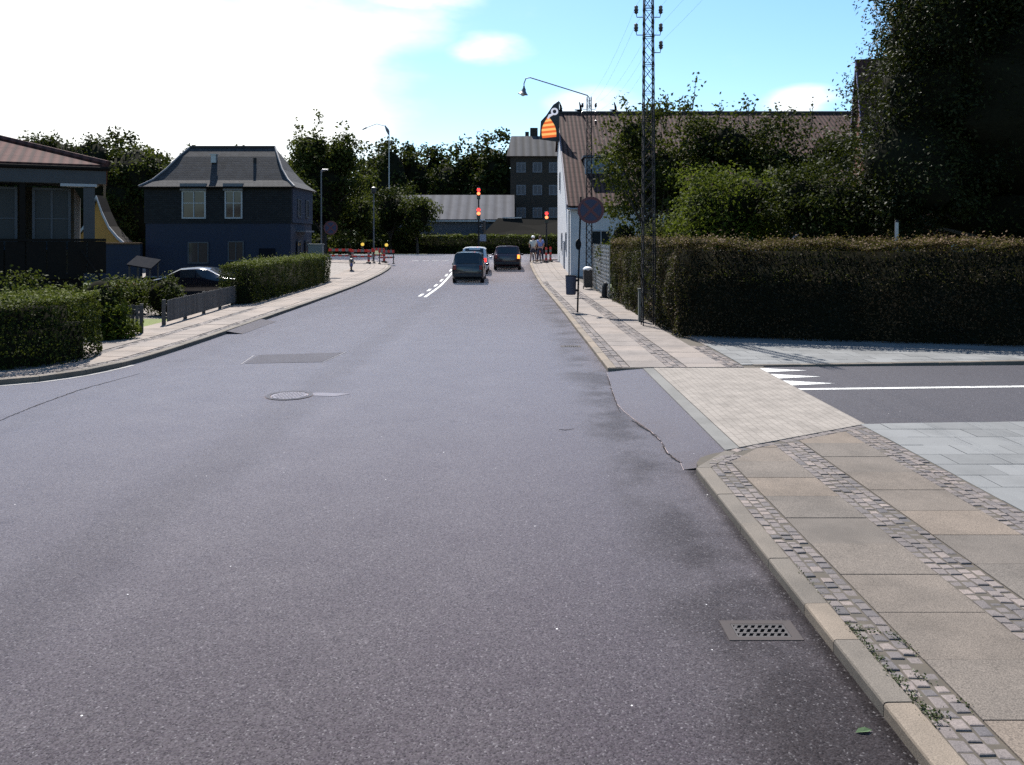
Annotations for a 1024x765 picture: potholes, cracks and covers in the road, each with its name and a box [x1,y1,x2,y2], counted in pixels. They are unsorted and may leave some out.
drain grate [719,620,804,641]
crack [607,377,680,462]
manhole cover [265,391,348,401]
